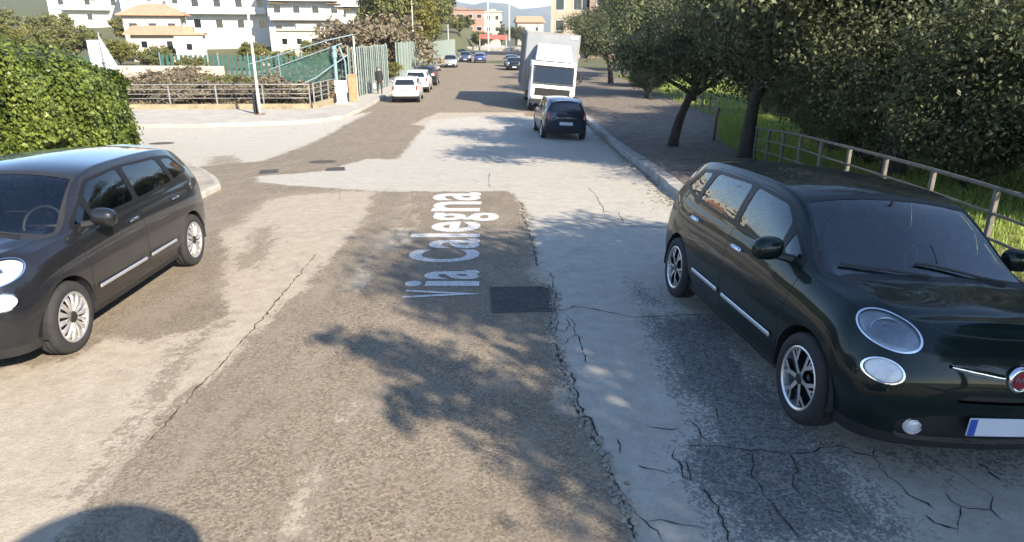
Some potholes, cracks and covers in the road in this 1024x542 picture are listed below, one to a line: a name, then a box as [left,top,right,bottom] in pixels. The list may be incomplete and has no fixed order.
crack [504,196,1003,542]
manhole cover [489,286,553,312]
